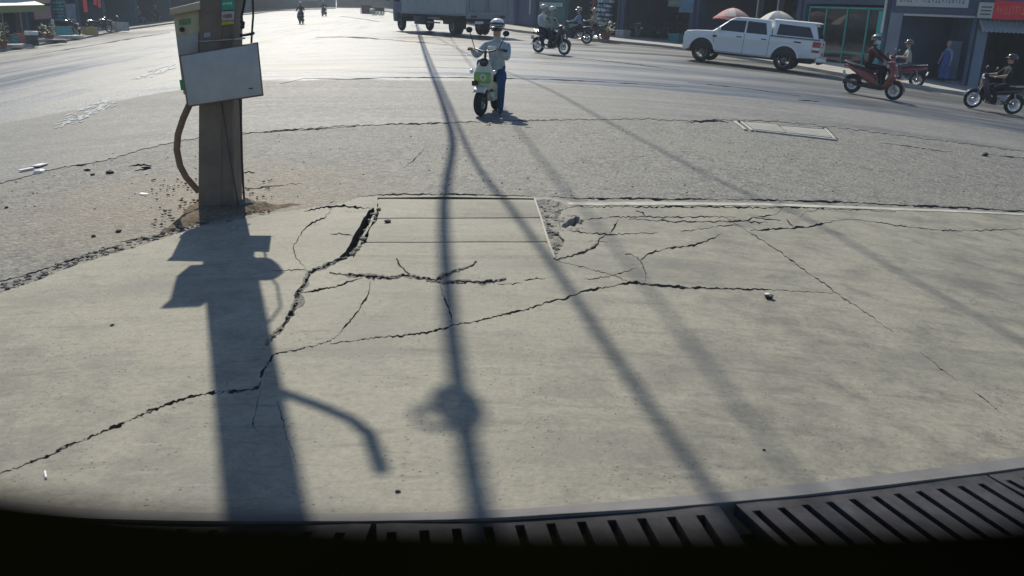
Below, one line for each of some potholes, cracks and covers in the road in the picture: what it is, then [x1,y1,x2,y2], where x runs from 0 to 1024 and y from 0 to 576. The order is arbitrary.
manhole cover [732,120,839,141]
pothole [536,199,568,260]
pothole [562,216,584,229]
drain grate [734,475,1024,527]
crack [0,204,1022,474]
drain grate [988,470,1024,498]
drain grate [395,506,734,528]
